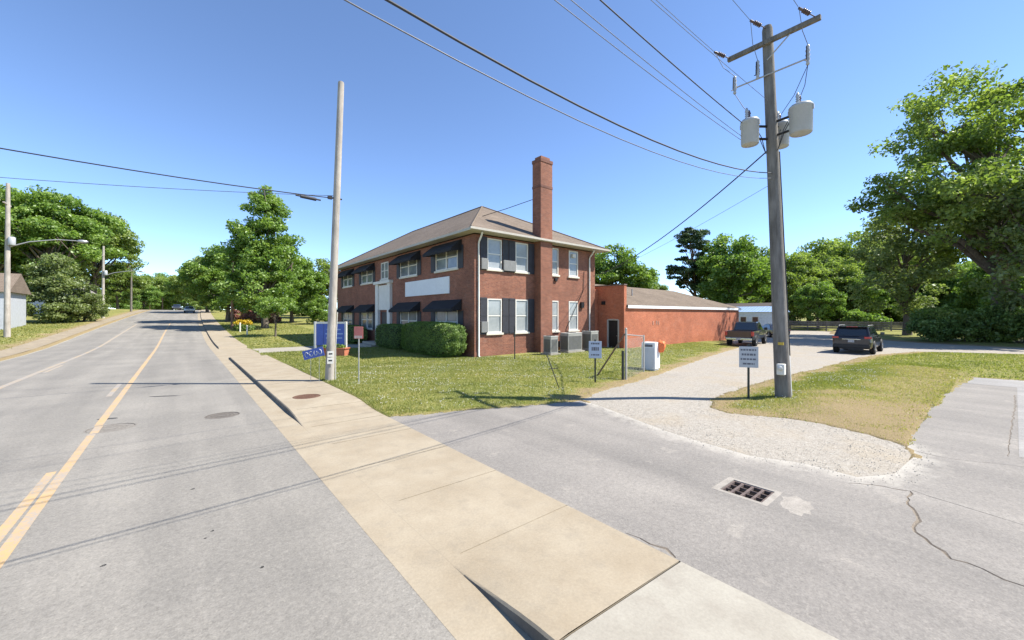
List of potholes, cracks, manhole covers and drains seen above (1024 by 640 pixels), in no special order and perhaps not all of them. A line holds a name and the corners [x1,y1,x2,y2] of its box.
crack [856,483,1024,587]
drain grate [712,477,783,506]
manhole cover [83,423,137,434]
crack [627,533,676,558]
